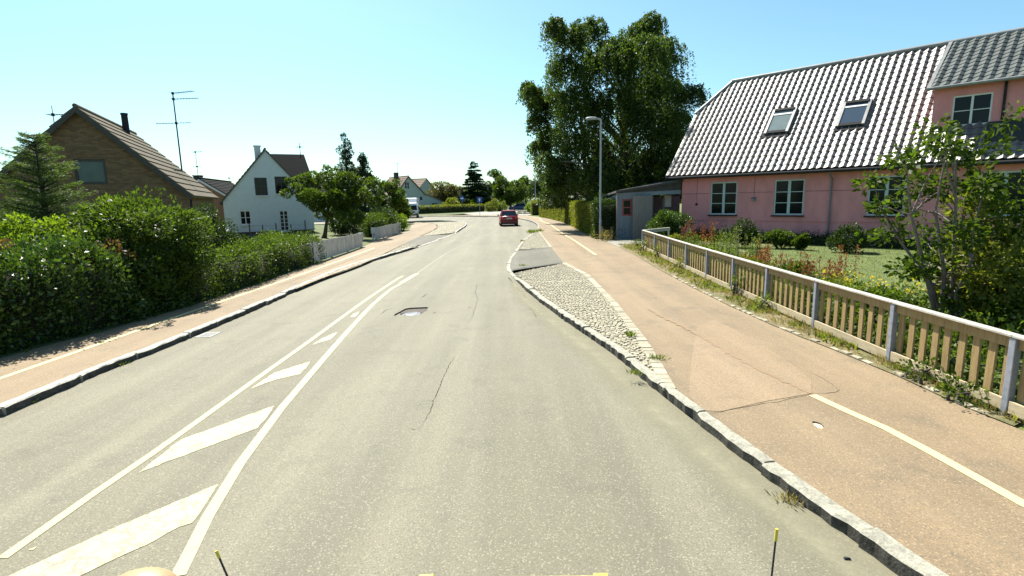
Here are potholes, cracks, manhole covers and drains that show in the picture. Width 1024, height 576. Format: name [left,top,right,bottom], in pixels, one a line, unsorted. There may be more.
crack [711,372,840,414]
pothole [394,307,428,316]
